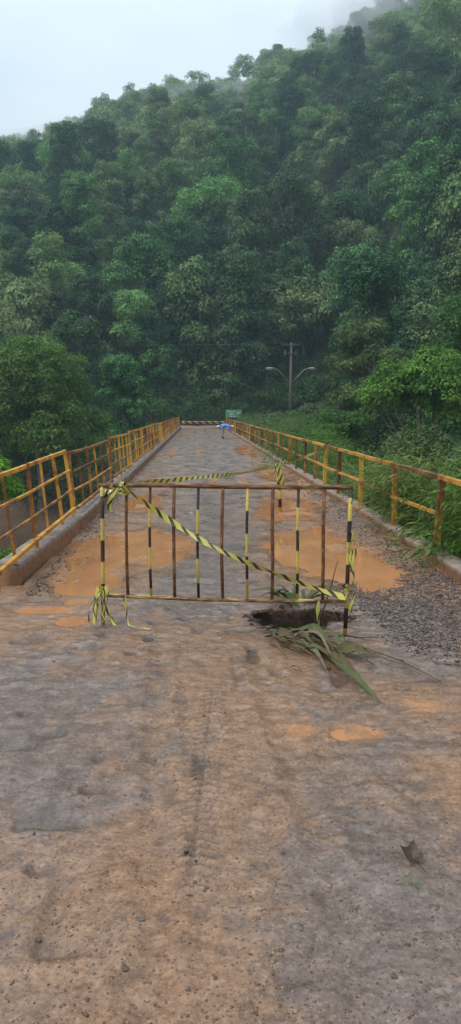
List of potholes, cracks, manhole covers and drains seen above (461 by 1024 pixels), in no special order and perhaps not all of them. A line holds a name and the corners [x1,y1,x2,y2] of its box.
pothole [242,605,358,629]
